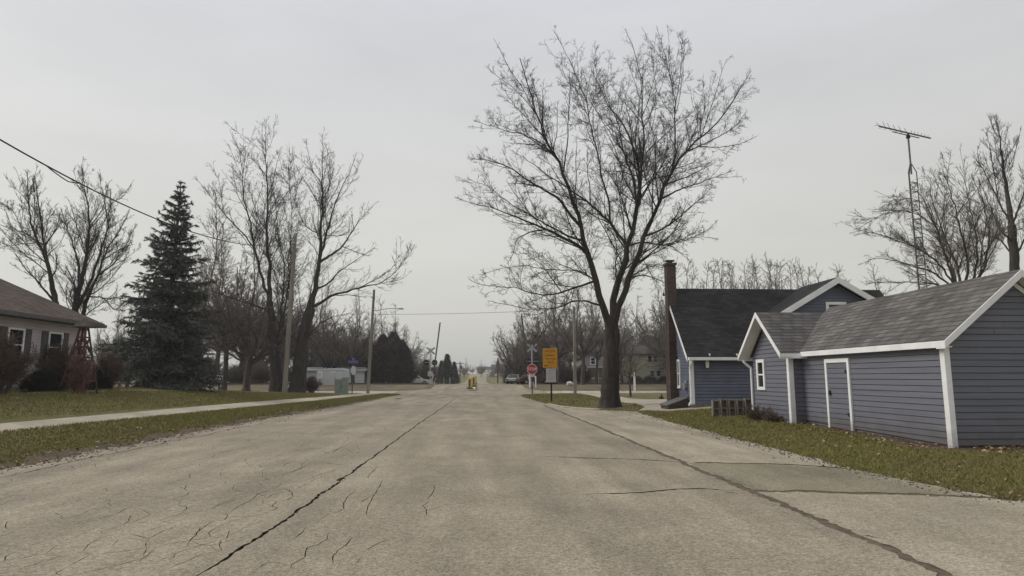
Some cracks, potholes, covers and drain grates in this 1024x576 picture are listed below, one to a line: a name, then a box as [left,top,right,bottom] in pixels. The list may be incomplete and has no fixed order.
crack [0,414,394,576]
crack [290,470,457,568]
